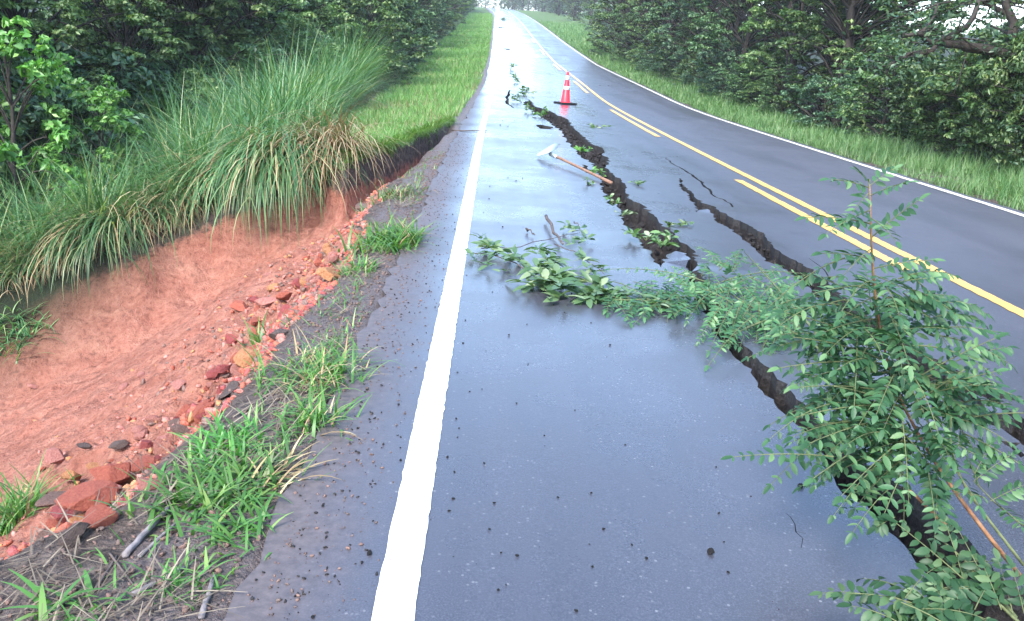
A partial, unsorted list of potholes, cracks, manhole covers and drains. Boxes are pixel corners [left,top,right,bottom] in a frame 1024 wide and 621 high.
crack [505,90,1024,621]
